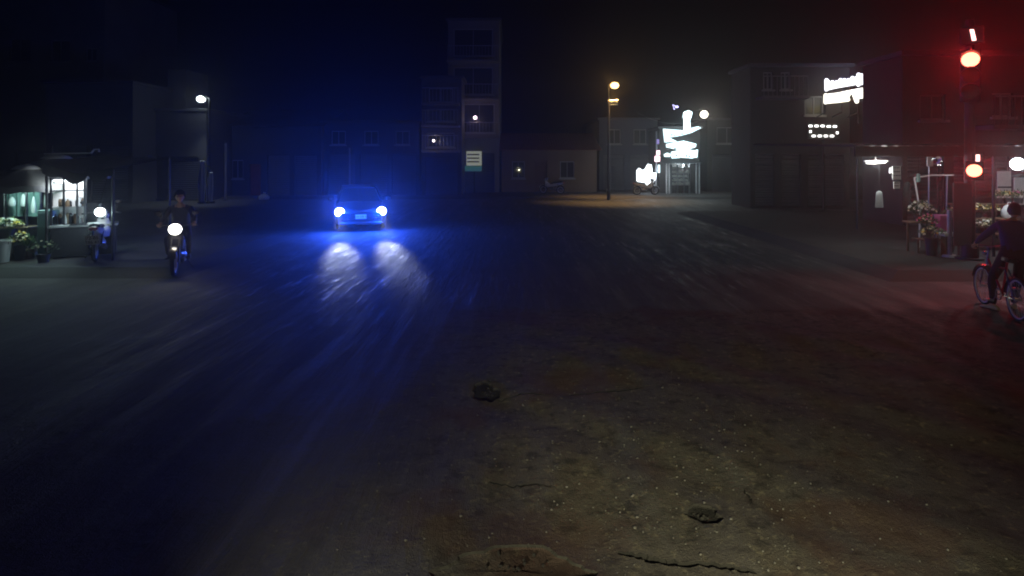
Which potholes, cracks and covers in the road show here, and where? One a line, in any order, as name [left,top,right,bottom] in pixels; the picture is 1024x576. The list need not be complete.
pothole [472,380,501,403]
crack [498,385,649,403]
pothole [429,544,599,576]
crack [618,551,757,574]
pothole [683,504,724,524]
